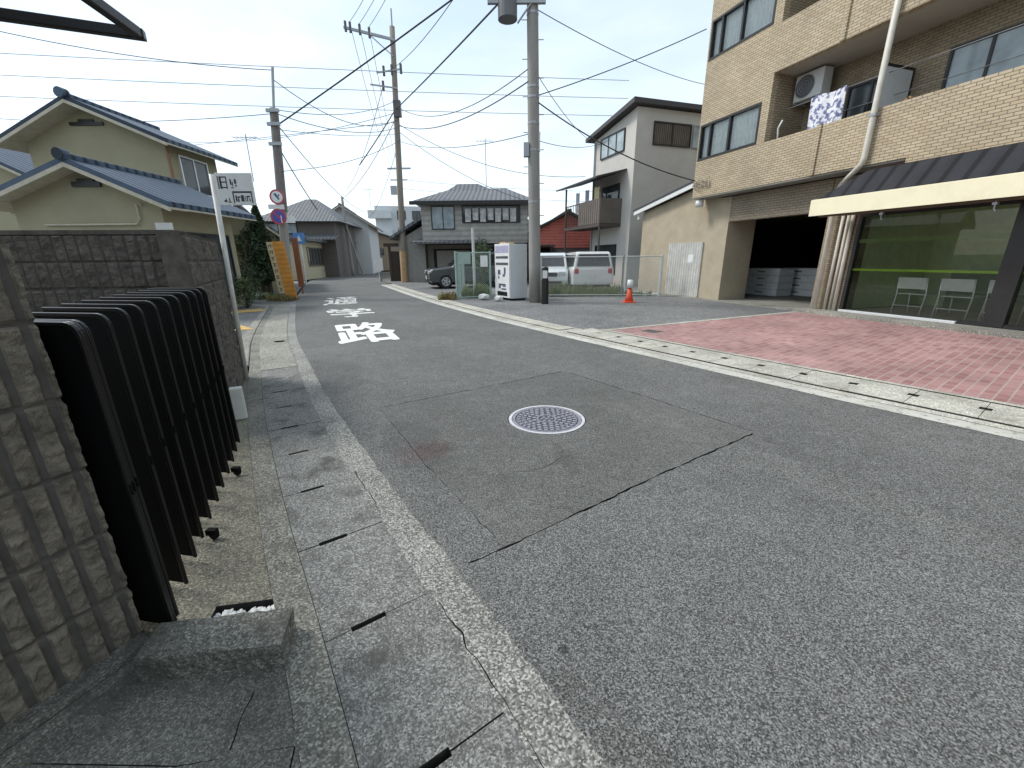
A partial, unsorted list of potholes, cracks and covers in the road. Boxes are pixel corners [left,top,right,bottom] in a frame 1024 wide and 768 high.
manhole cover [508,405,586,435]
crack [437,600,544,768]
crack [383,371,753,563]
crack [229,689,255,750]
